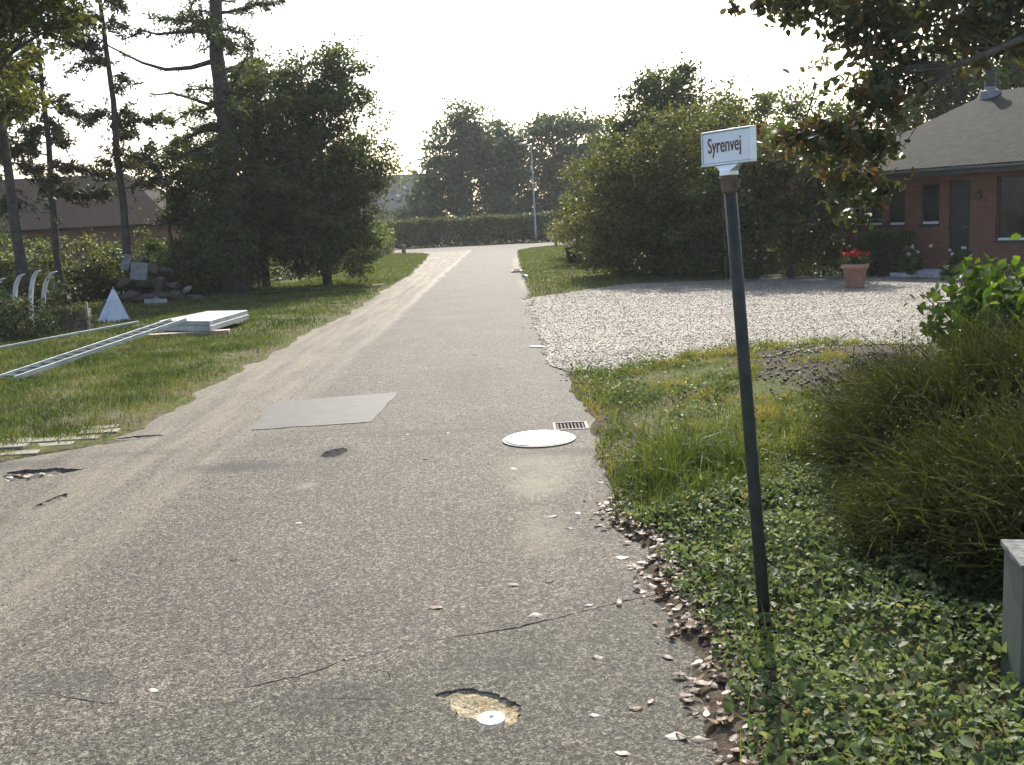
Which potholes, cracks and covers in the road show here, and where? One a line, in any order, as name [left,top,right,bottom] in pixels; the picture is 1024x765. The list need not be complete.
pothole [435,688,522,725]
drain grate [552,421,589,431]
pothole [2,467,82,482]
crack [40,693,107,704]
crack [243,595,652,688]
manhole cover [502,430,576,448]
pothole [320,448,348,458]
